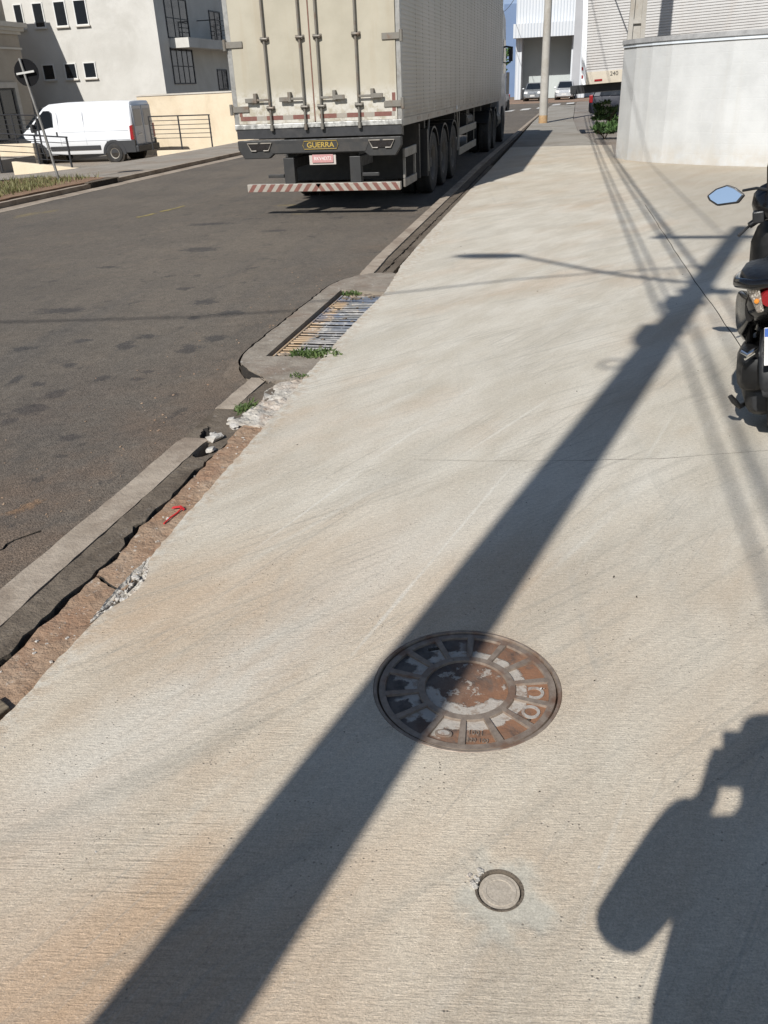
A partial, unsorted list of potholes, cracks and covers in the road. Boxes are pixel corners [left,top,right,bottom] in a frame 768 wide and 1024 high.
pothole [89,557,150,624]
manhole cover [373,631,562,753]
crack [0,469,201,667]
